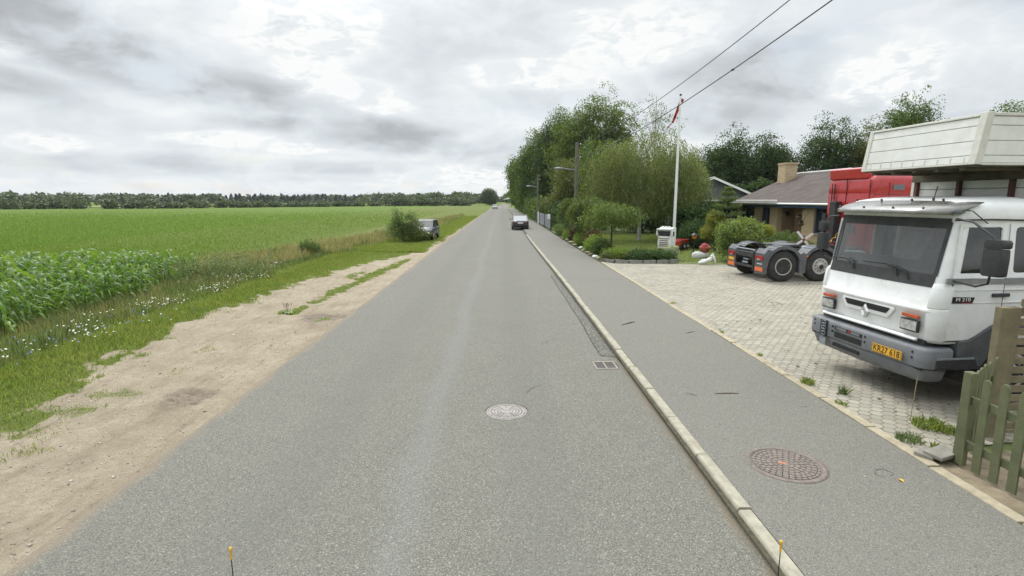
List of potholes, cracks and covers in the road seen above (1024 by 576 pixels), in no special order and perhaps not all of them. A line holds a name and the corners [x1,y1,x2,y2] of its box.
manhole cover [485,403,527,420]
drain grate [592,361,619,369]
manhole cover [745,447,829,484]
